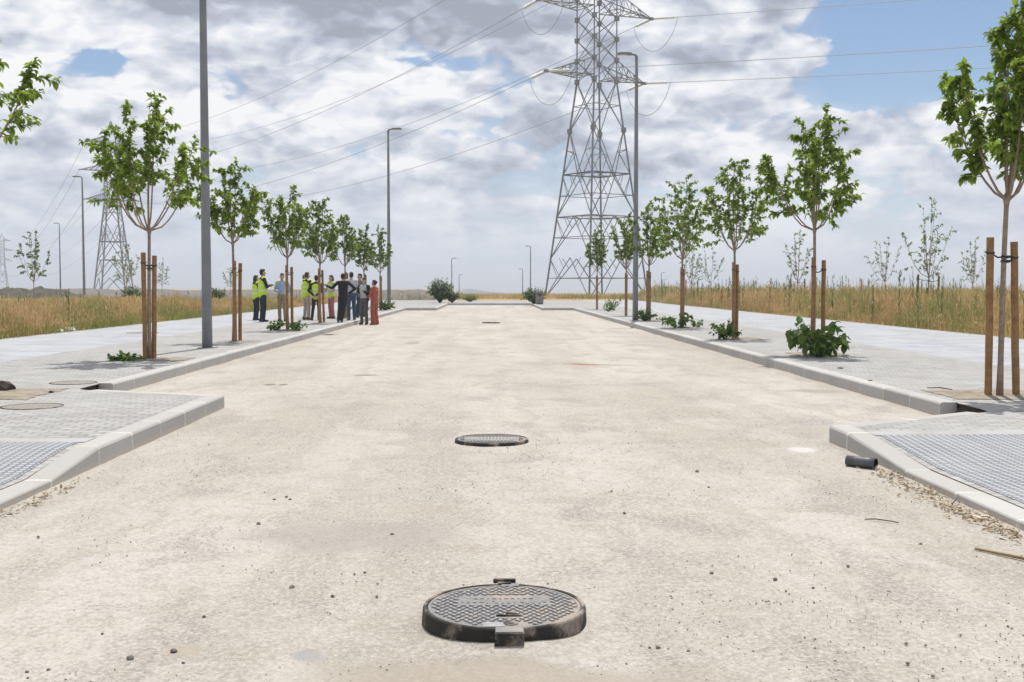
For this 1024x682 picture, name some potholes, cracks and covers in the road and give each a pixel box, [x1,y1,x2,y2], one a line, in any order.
manhole cover [455,434,529,447]
manhole cover [422,578,587,647]
